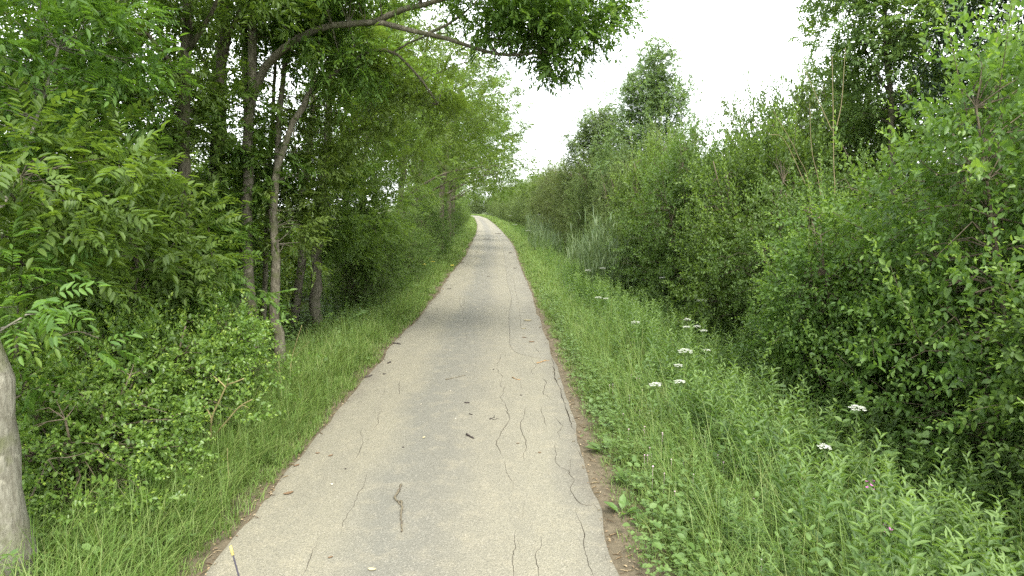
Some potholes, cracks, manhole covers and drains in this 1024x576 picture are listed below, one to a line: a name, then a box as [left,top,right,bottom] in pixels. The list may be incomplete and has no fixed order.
crack [340,382,400,535]
crack [496,347,607,576]
